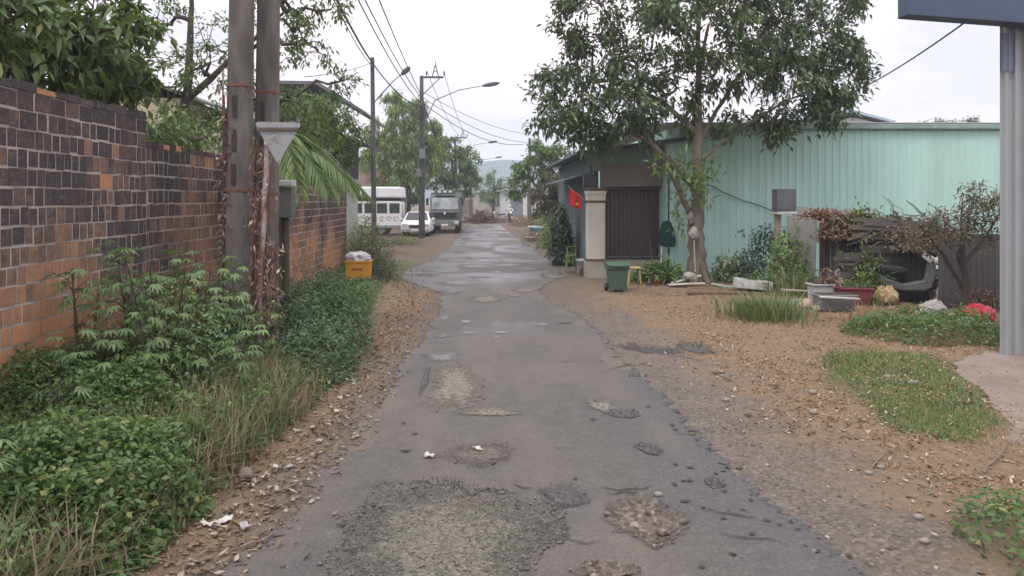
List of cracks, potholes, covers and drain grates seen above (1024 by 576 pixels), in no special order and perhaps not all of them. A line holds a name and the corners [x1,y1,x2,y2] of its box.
pothole [605,409,641,418]
pothole [444,441,513,469]
pothole [568,557,641,576]
pothole [317,475,567,576]
pothole [634,442,664,455]
pothole [604,498,689,549]
pothole [539,484,590,510]
